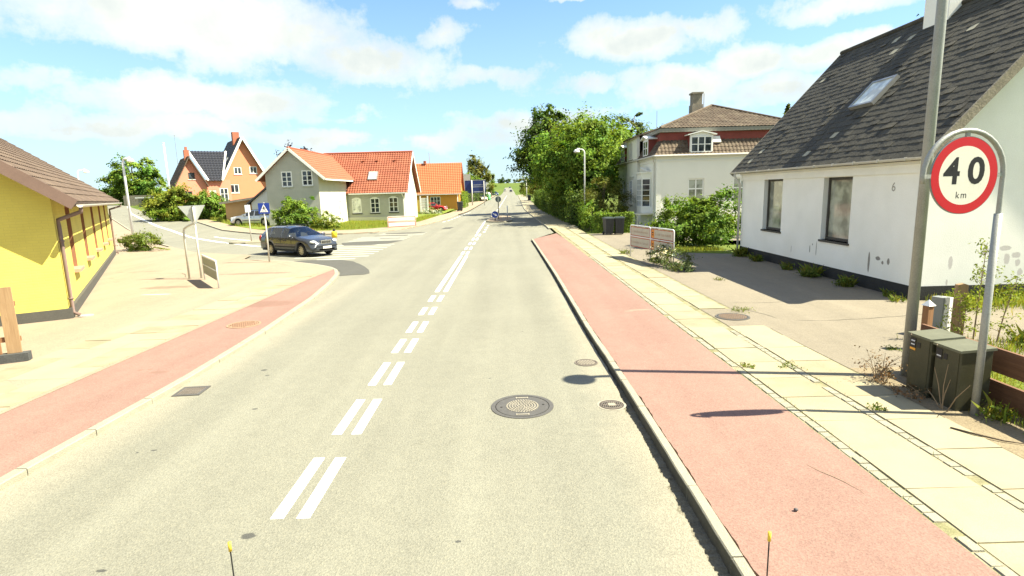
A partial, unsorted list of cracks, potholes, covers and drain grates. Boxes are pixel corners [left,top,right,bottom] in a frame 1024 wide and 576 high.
manhole cover [597,400,626,410]
manhole cover [226,321,261,329]
manhole cover [491,395,554,419]
manhole cover [715,313,750,321]
drain grate [171,386,211,397]
